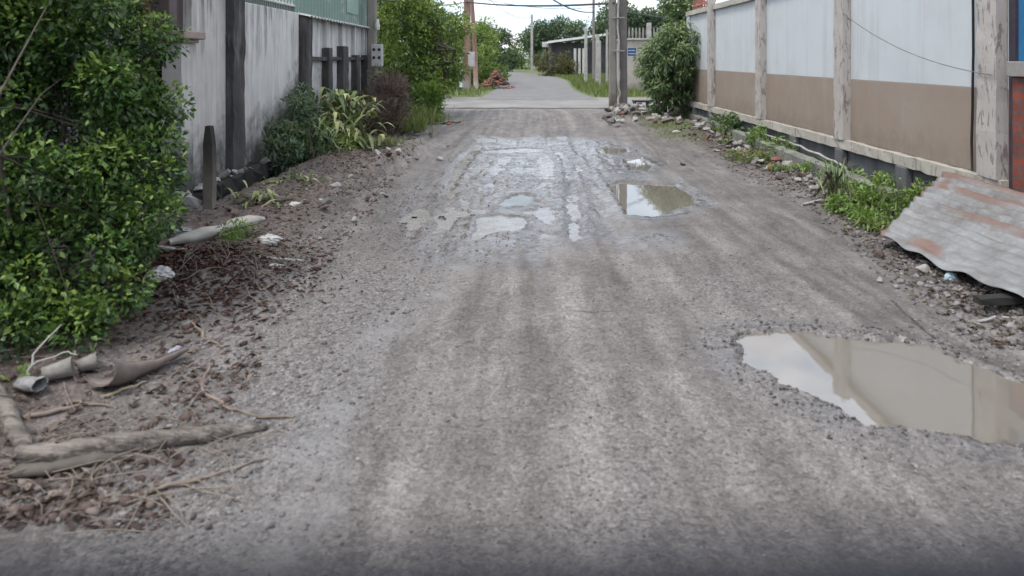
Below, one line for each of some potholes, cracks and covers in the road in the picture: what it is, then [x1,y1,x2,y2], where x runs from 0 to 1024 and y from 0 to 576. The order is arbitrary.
pothole [620,156,657,170]
pothole [595,145,630,154]
pothole [466,213,534,241]
pothole [605,179,701,219]
pothole [728,324,1024,447]
pothole [492,192,544,207]
